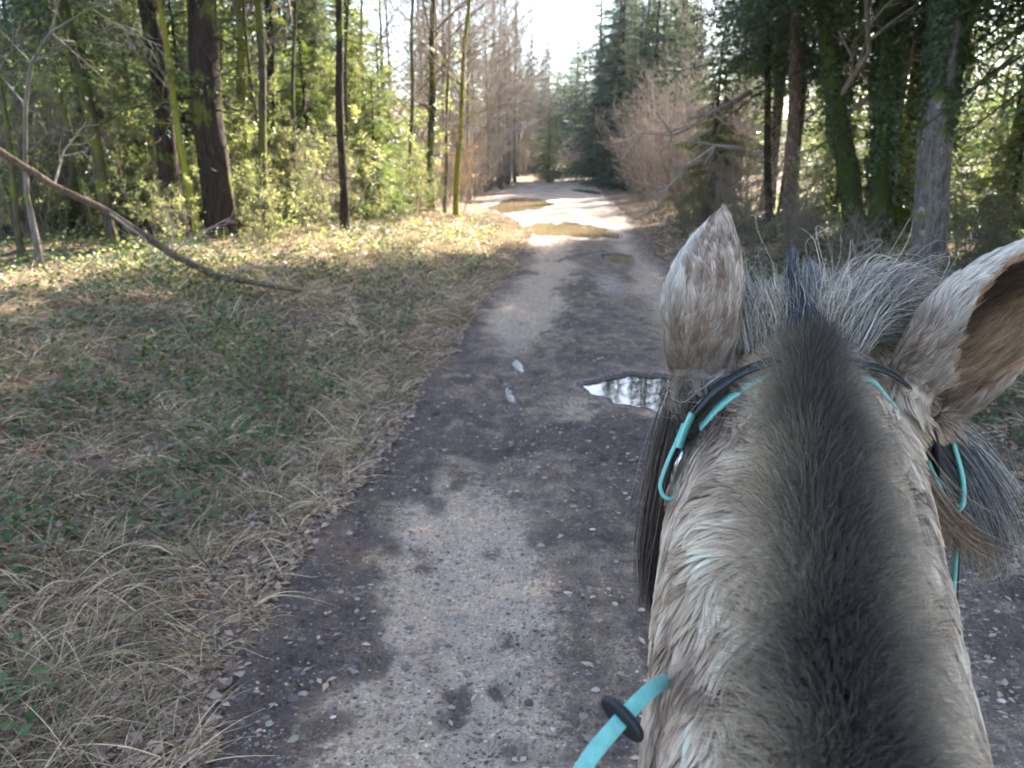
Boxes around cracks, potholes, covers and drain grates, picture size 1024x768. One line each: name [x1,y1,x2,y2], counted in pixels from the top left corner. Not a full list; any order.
pothole [480,197,558,214]
pothole [598,252,635,266]
pothole [575,371,671,419]
pothole [520,221,624,239]
